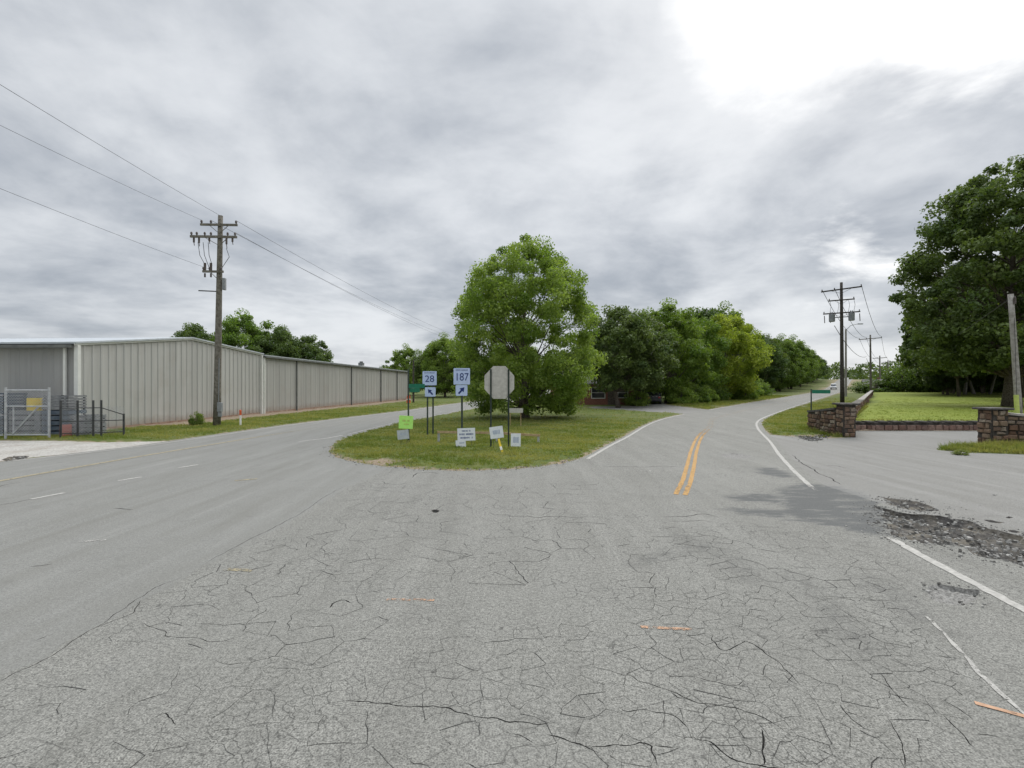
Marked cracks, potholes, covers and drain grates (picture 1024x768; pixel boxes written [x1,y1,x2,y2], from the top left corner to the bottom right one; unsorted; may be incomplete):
pothole [882,497,939,512]
pothole [925,584,980,606]
pothole [874,507,1024,567]
crack [1,584,973,768]
crack [109,533,387,665]
crack [308,482,616,588]
crack [612,514,908,601]
